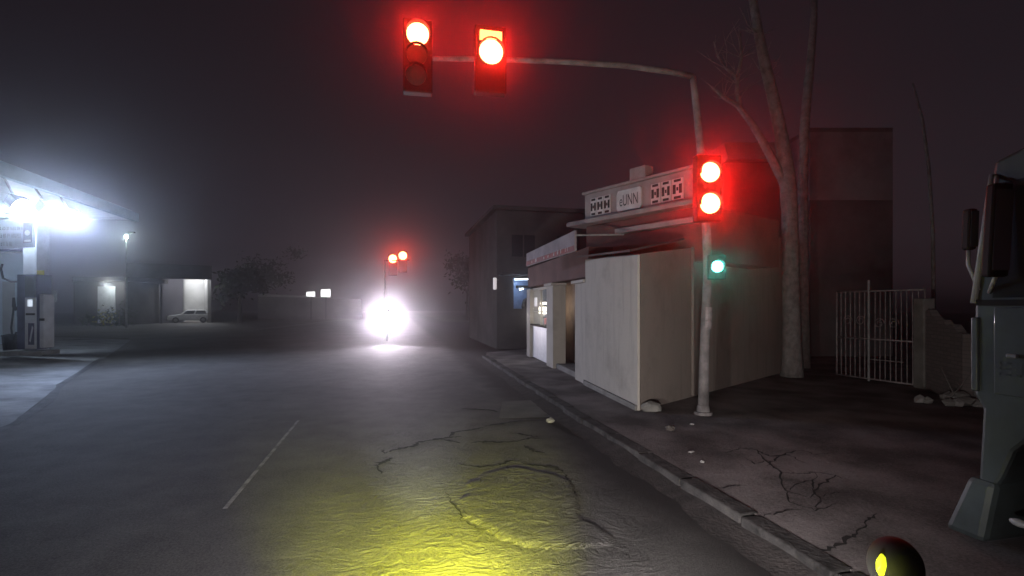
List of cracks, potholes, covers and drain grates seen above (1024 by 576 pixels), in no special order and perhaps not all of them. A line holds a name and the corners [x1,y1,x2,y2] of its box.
crack [445,492,486,530]
crack [716,448,877,551]
crack [374,408,575,494]
